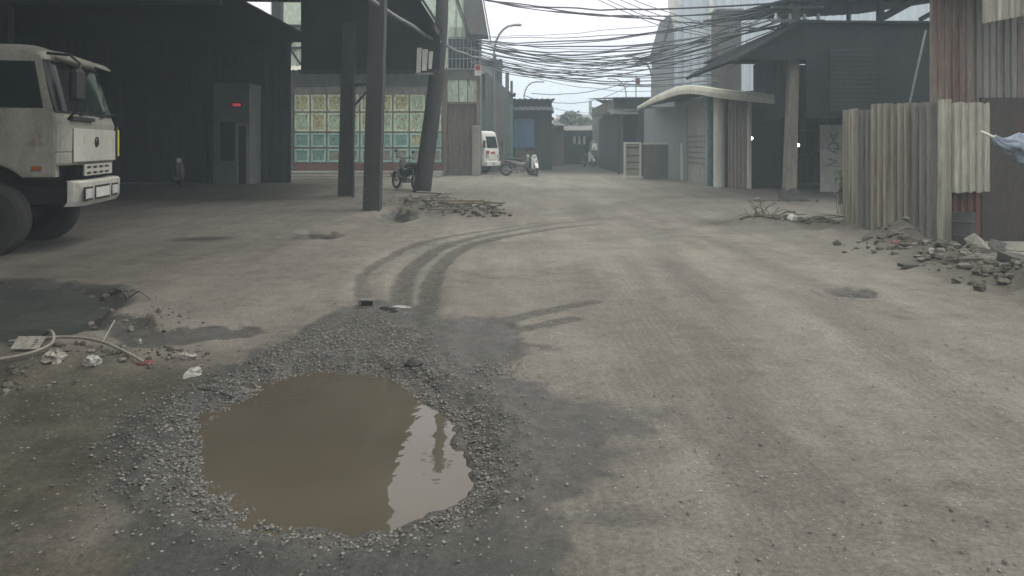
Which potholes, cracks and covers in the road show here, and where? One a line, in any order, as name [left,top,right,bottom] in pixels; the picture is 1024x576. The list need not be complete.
pothole [807,284,897,302]
pothole [270,229,353,242]
pothole [368,206,425,224]
pothole [105,349,563,576]
